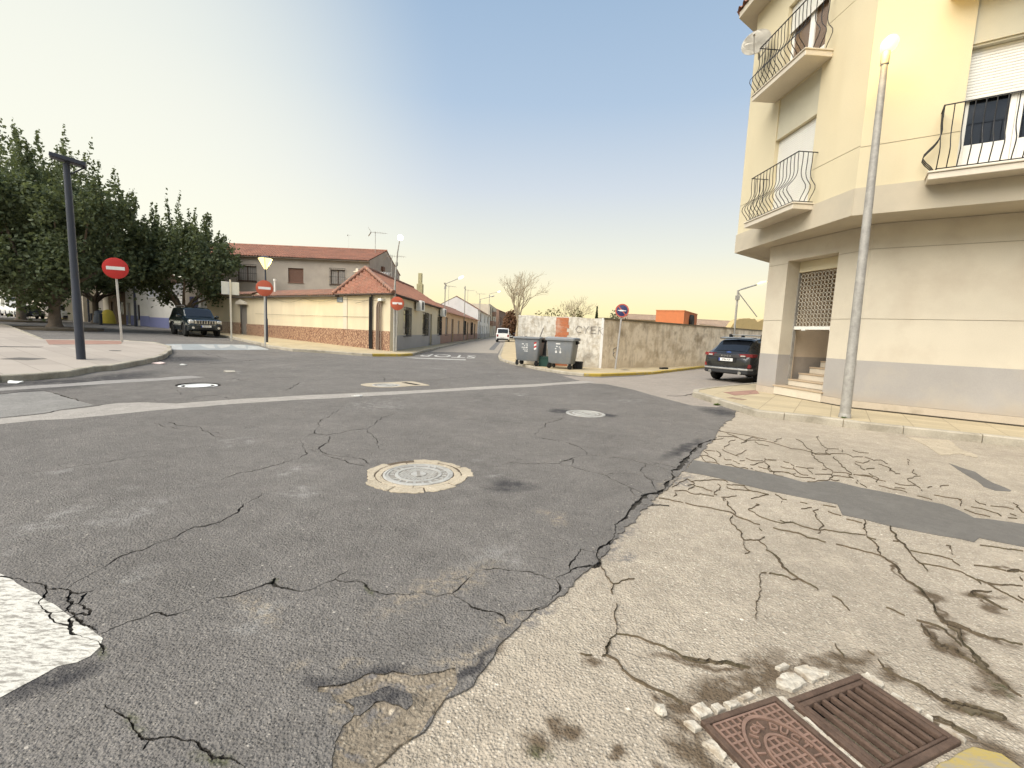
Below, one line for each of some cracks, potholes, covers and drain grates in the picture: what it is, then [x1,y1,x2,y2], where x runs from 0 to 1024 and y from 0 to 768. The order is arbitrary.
drain grate [787,673,961,768]
crack [1,496,259,653]
crack [105,704,246,768]
crack [100,418,1024,740]
manhole cover [366,459,474,494]
pothole [317,668,457,768]
